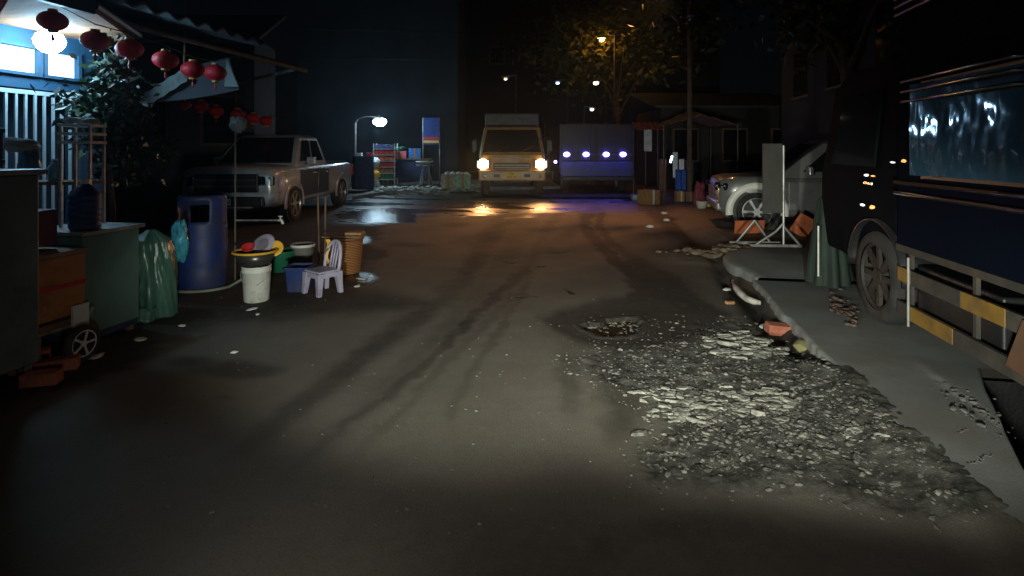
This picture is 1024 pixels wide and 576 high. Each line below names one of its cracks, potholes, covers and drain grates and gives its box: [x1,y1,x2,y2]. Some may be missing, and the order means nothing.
pothole [559,313,658,340]
